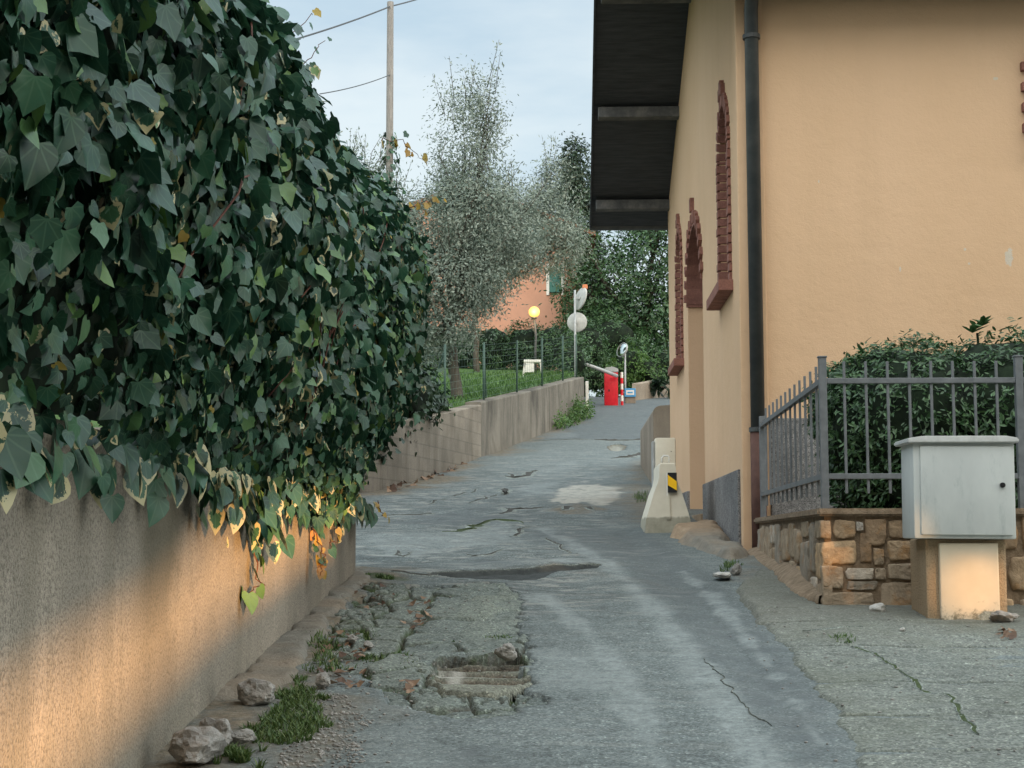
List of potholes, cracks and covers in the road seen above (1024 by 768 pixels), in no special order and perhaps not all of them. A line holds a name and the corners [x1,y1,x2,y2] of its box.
crack [704,657,772,726]
pothole [428,563,602,581]
crack [802,626,979,735]
pothole [424,664,533,703]
crack [328,550,547,719]
crack [387,470,578,556]
